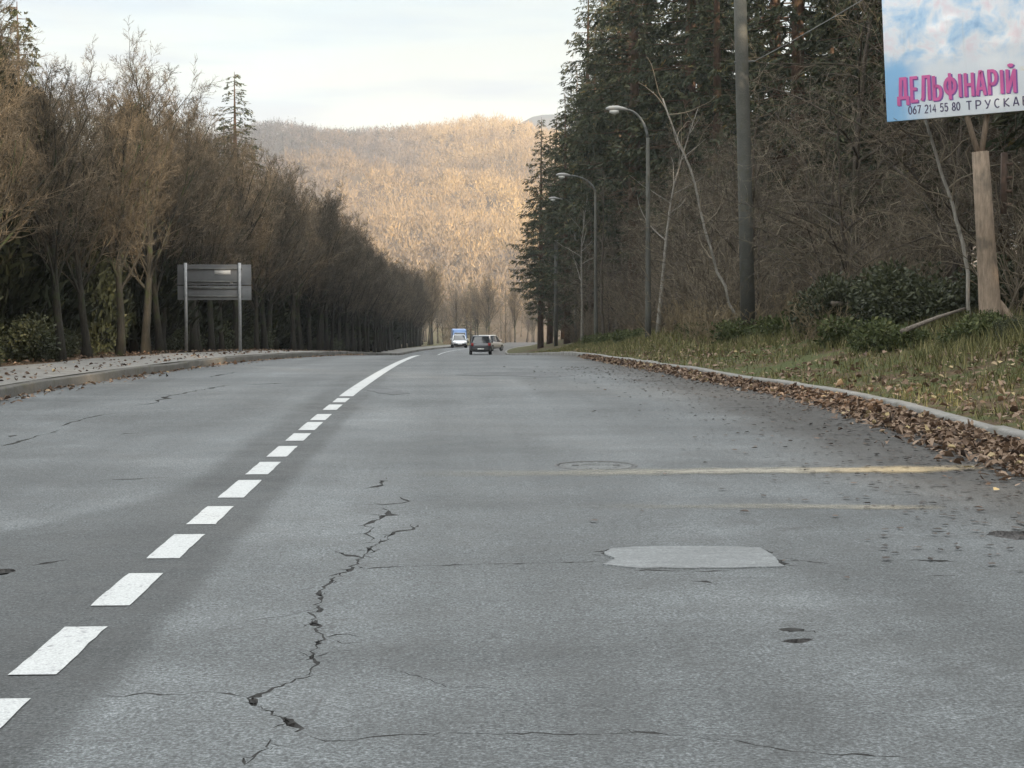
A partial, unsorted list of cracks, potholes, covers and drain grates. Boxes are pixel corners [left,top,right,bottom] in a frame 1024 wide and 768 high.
pothole [987,531,1024,540]
crack [97,481,610,765]
manhole cover [554,461,638,470]
crack [2,413,115,446]
